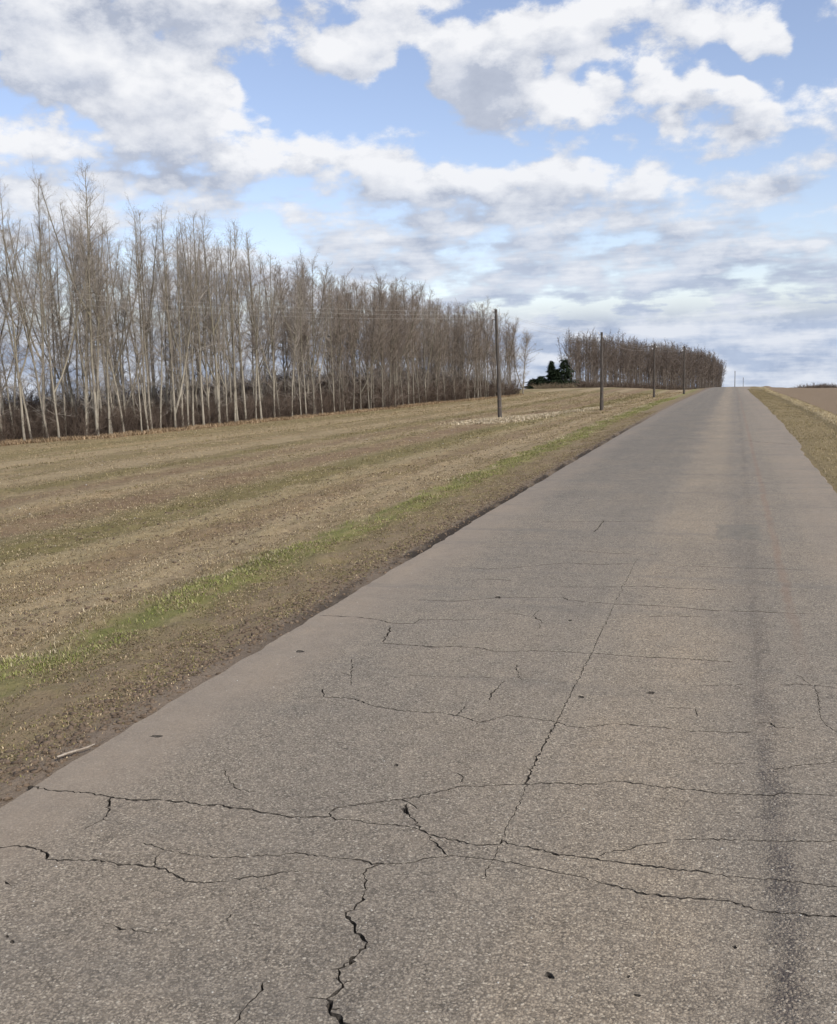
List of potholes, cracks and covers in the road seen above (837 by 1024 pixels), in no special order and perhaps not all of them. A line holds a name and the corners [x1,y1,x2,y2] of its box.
crack [791,676,835,731]
crack [0,770,837,1024]
crack [303,615,748,733]
